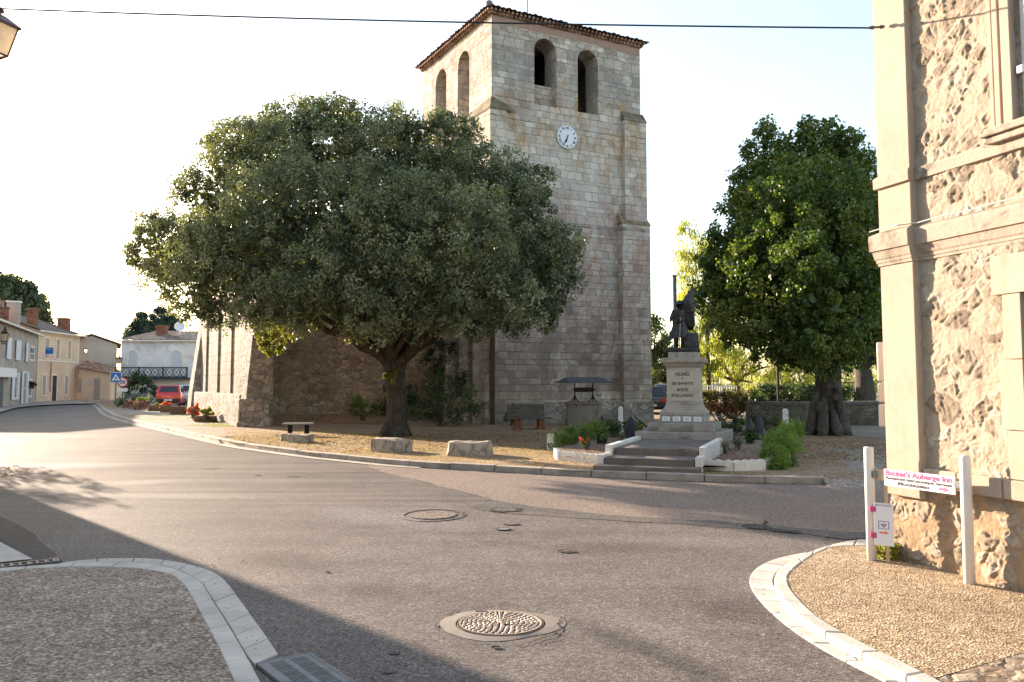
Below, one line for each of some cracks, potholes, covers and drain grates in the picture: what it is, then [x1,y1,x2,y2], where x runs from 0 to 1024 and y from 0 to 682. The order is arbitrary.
manhole cover [399,509,466,521]
drain grate [256,652,356,682]
manhole cover [439,610,566,641]
